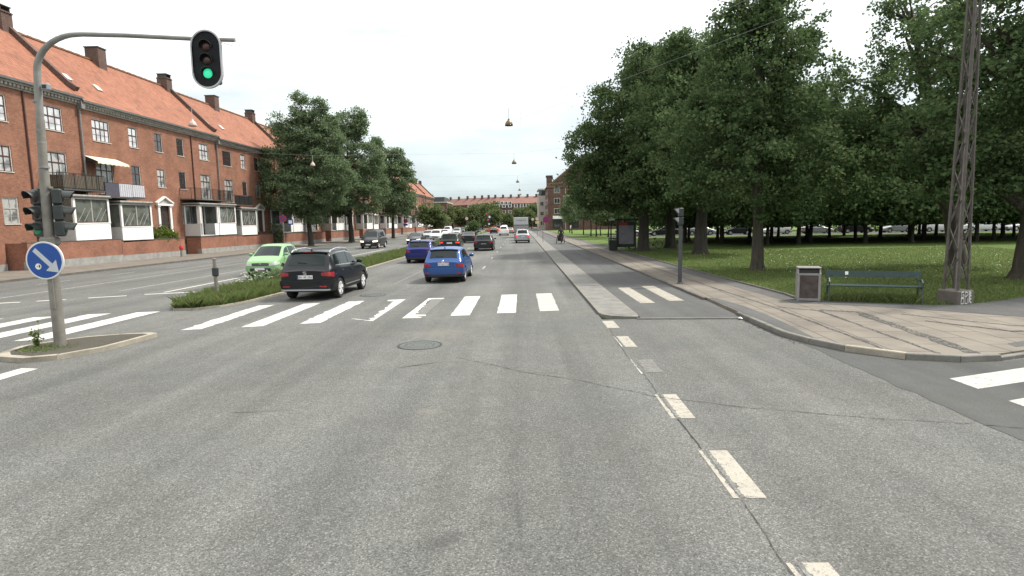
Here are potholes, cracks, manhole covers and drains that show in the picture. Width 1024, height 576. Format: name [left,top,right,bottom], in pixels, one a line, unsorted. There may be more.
crack [462,329,974,449]
manhole cover [397,341,442,350]
